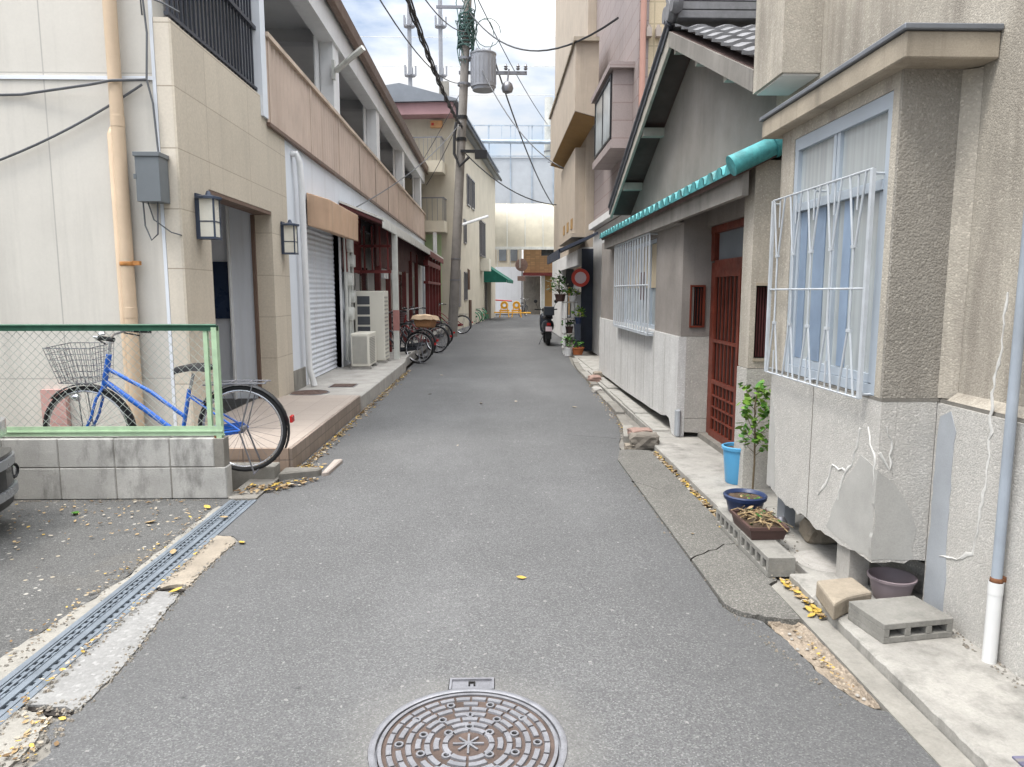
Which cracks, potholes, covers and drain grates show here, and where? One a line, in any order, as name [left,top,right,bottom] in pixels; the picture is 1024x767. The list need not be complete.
pothole [767,621,880,710]
manhole cover [368,677,568,767]
